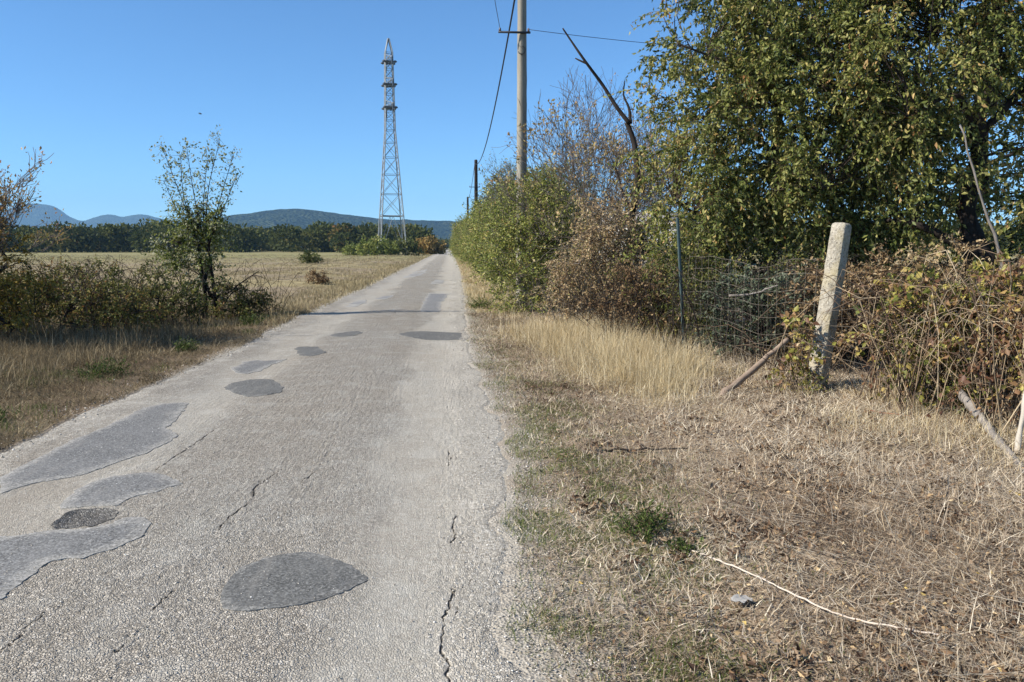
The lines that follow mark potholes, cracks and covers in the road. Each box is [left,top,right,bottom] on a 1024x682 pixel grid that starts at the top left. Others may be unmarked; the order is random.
crack [218,469,282,531]
crack [439,583,470,682]
